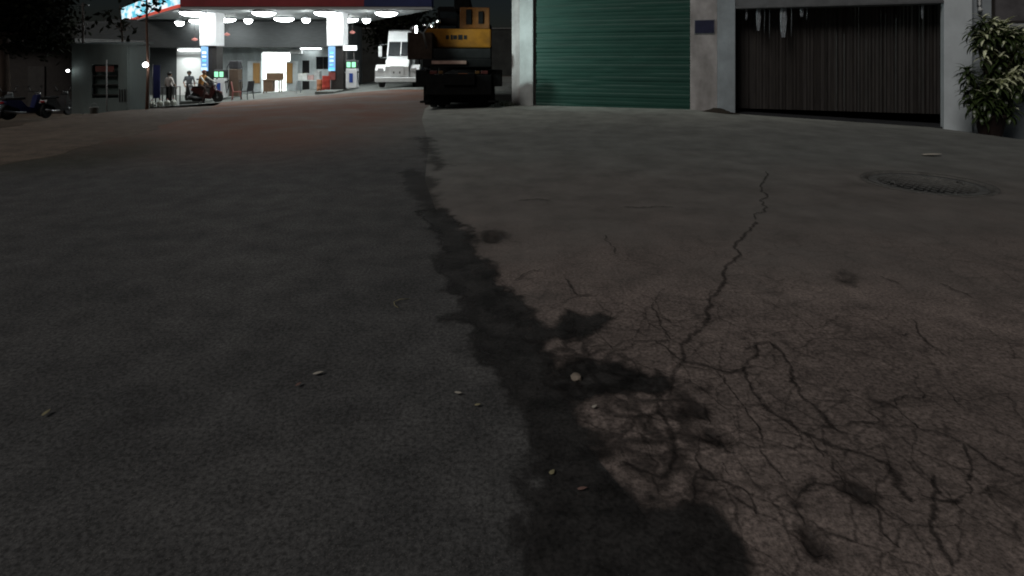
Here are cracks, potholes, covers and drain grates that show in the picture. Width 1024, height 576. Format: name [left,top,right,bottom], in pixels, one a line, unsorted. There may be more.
manhole cover [860,171,1001,197]
